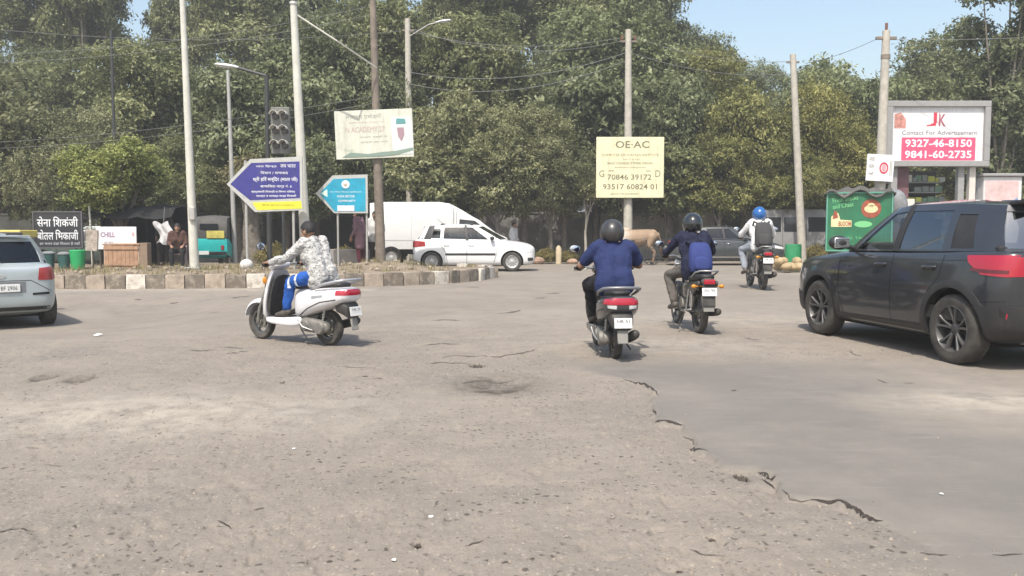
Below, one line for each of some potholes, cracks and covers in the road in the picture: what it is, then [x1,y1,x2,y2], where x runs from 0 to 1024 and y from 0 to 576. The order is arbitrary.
crack [429,343,537,384]
pothole [475,380,523,393]
crack [627,380,708,451]
crack [758,472,883,521]
